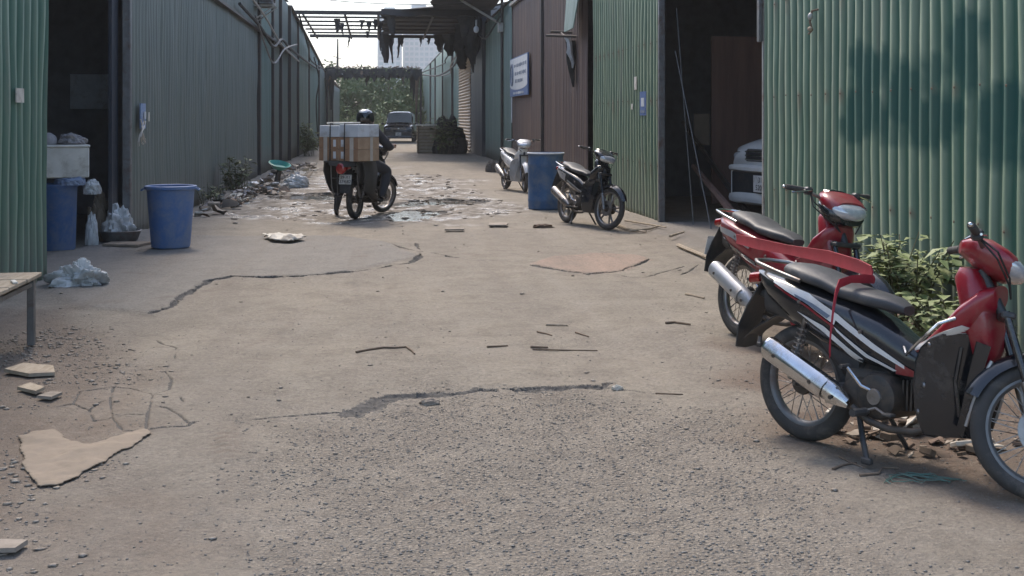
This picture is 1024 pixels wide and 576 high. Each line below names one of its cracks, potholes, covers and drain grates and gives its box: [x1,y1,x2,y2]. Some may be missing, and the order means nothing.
pothole [380,209,454,224]
pothole [381,197,501,208]
crack [138,241,467,317]
crack [43,339,692,435]
